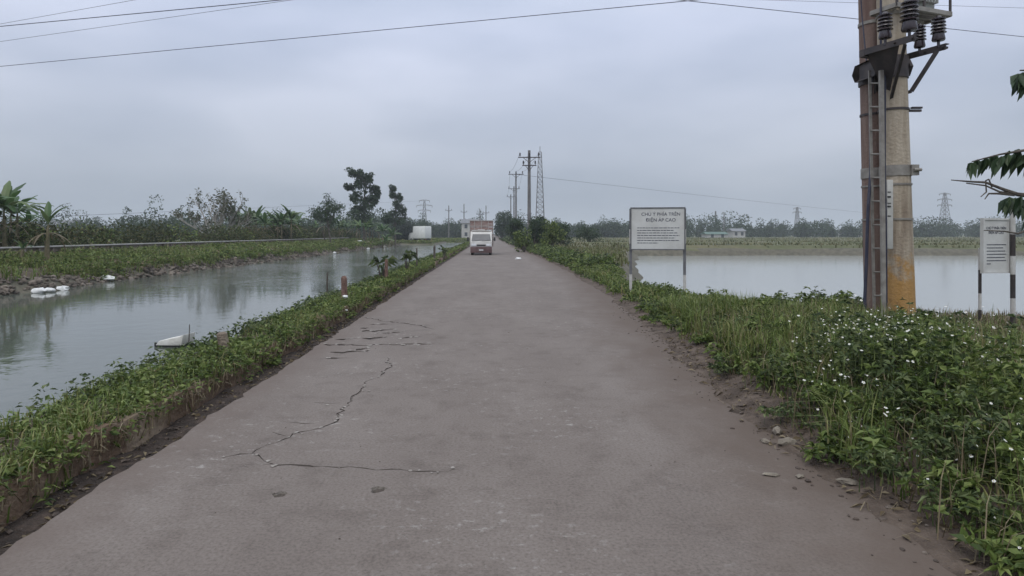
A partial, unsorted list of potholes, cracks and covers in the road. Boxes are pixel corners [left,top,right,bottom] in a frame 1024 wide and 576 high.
crack [222,317,455,473]
